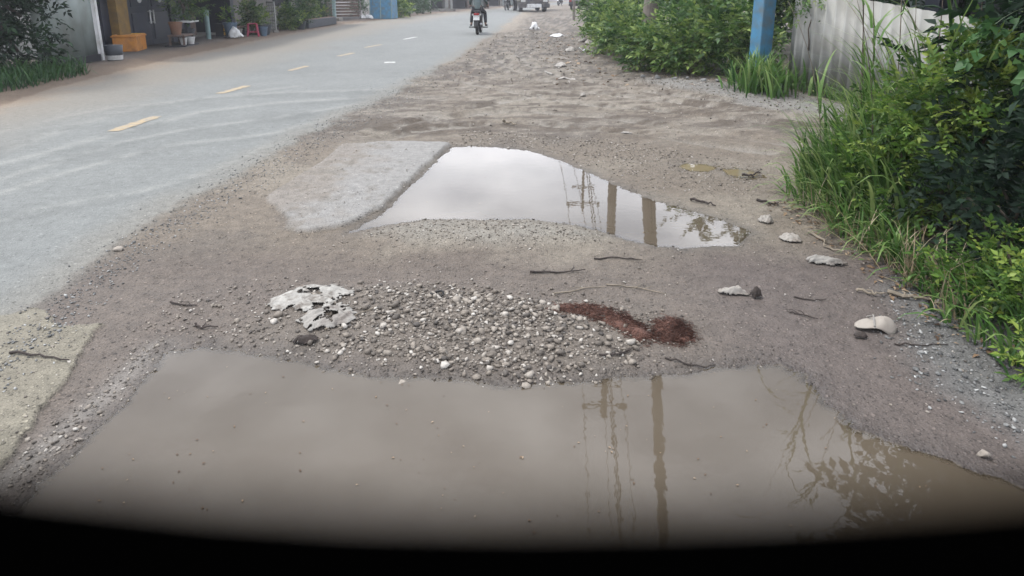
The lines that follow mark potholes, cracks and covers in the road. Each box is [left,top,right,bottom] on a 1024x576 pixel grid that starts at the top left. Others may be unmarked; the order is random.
pothole [339,144,767,253]
pothole [30,336,1024,509]
